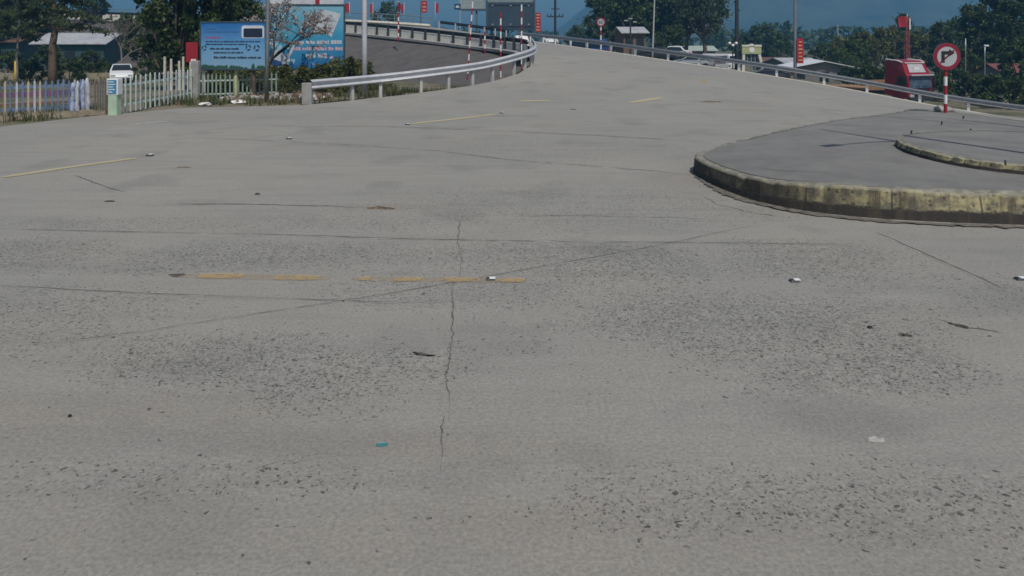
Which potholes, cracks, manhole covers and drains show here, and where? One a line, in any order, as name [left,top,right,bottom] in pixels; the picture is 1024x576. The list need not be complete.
crack [413,223,463,470]
